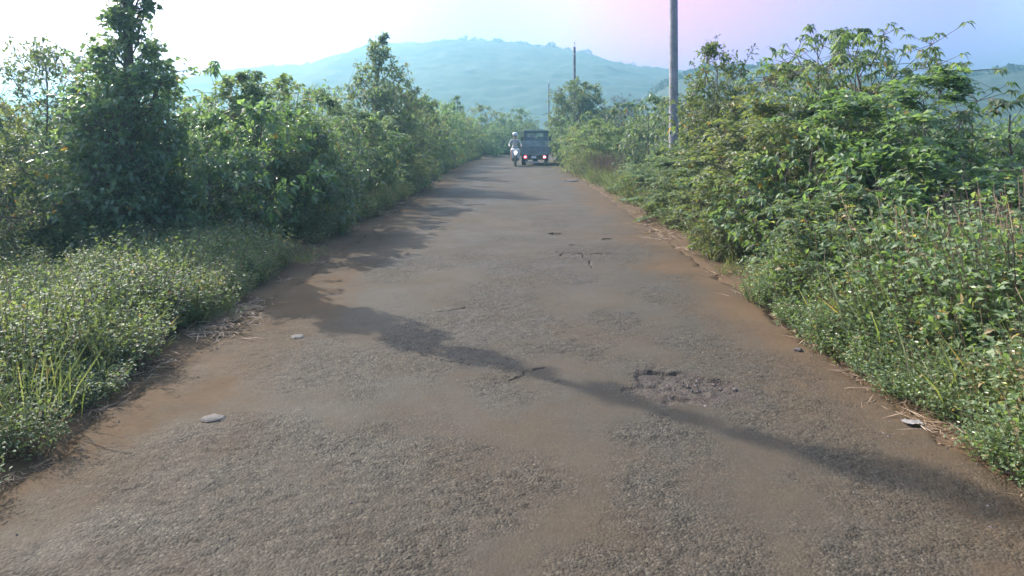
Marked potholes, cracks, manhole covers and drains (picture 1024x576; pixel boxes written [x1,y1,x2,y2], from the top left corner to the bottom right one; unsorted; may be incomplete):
crack [510,367,545,382]
crack [558,252,619,269]
pothole [621,369,757,406]
